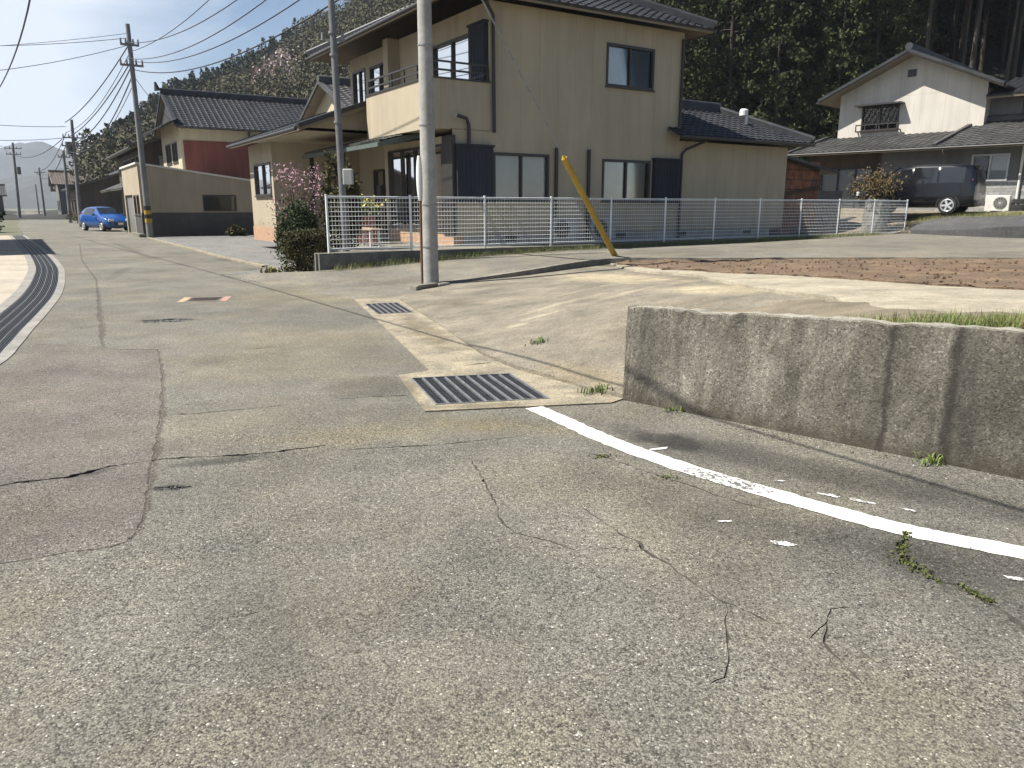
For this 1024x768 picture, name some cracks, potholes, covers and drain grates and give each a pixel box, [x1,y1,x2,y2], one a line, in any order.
crack [472,461,780,684]
crack [0,445,325,486]
drain grate [411,373,550,405]
drain grate [365,302,413,314]
crack [810,607,868,688]
